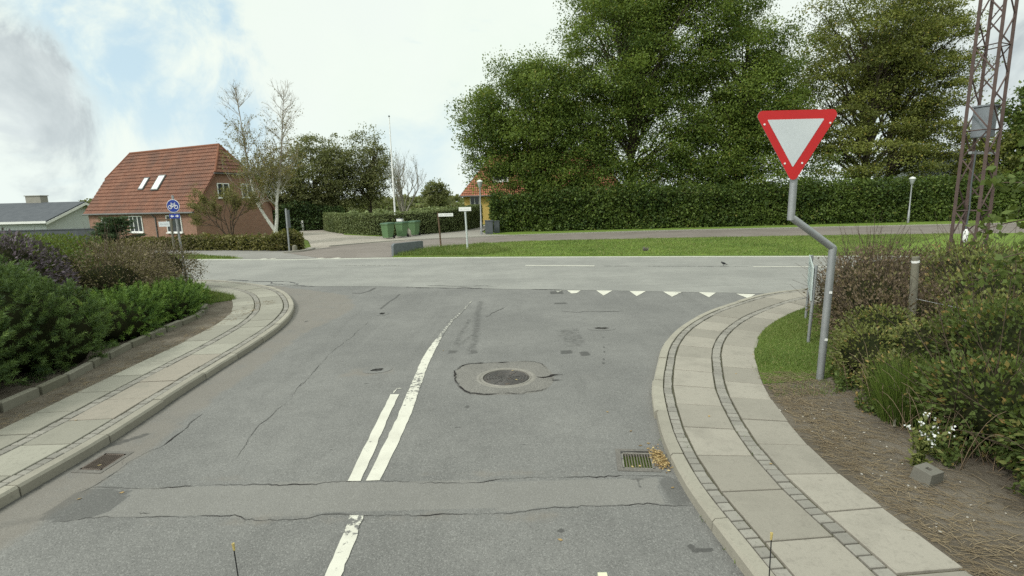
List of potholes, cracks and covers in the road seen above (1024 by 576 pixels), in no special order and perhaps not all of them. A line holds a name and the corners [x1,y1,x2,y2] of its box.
drain grate [615,449,662,472]
drain grate [72,451,133,473]
crack [80,414,672,492]
crack [238,322,368,455]
manhole cover [476,368,536,388]
